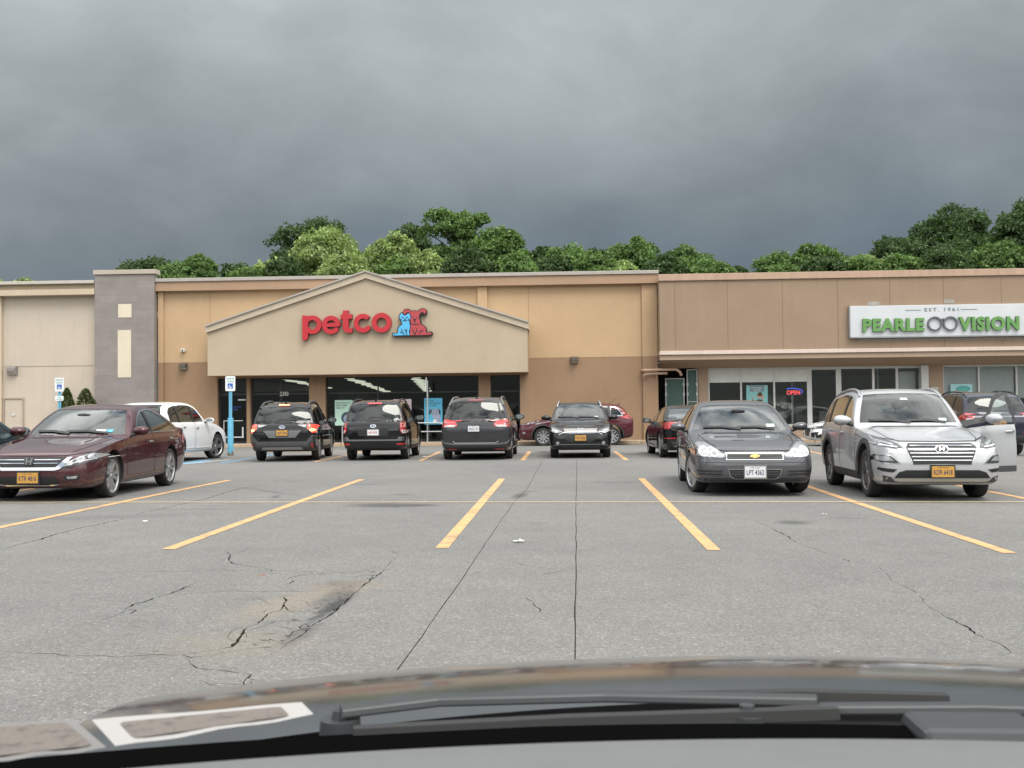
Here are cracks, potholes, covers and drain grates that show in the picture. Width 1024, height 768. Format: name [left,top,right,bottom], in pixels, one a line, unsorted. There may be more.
crack [2,548,414,687]
crack [878,566,1011,652]
